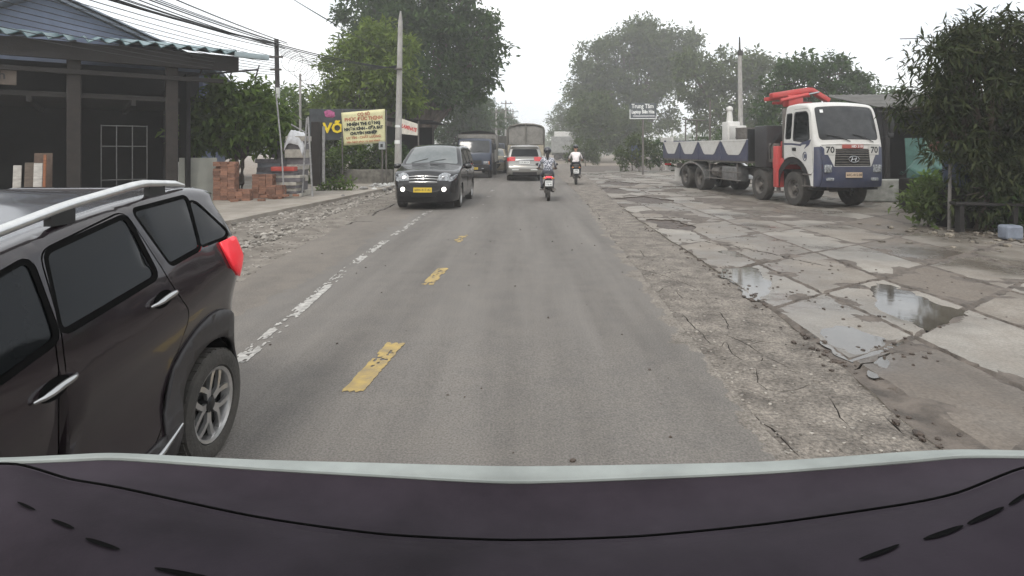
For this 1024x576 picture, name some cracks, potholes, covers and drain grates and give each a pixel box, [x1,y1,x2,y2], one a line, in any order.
crack [683,311,849,426]
pothole [646,219,696,231]
